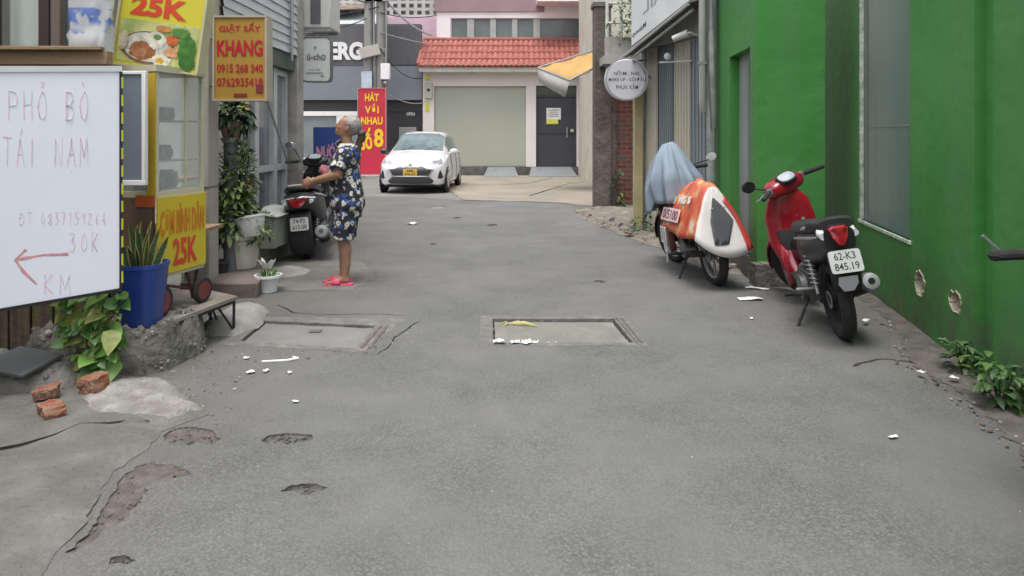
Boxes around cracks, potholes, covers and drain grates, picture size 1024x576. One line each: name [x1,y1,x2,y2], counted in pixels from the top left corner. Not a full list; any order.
manhole cover [478,316,648,346]
manhole cover [218,317,404,352]
crack [853,358,913,367]
pothole [109,555,136,564]
pothole [65,461,192,554]
crack [0,420,150,450]
crack [277,304,417,355]
pothole [261,433,313,445]
pothole [281,483,327,495]
pothole [163,426,220,445]
